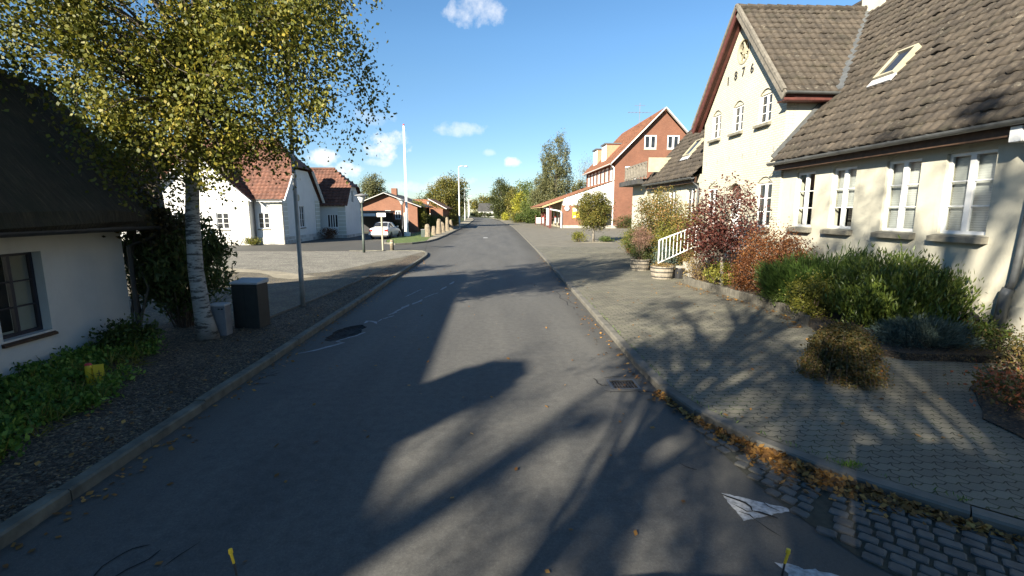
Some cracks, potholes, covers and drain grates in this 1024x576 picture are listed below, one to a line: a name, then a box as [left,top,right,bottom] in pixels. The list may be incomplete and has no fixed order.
crack [93,542,199,576]
crack [593,376,651,395]
pothole [325,325,366,342]
